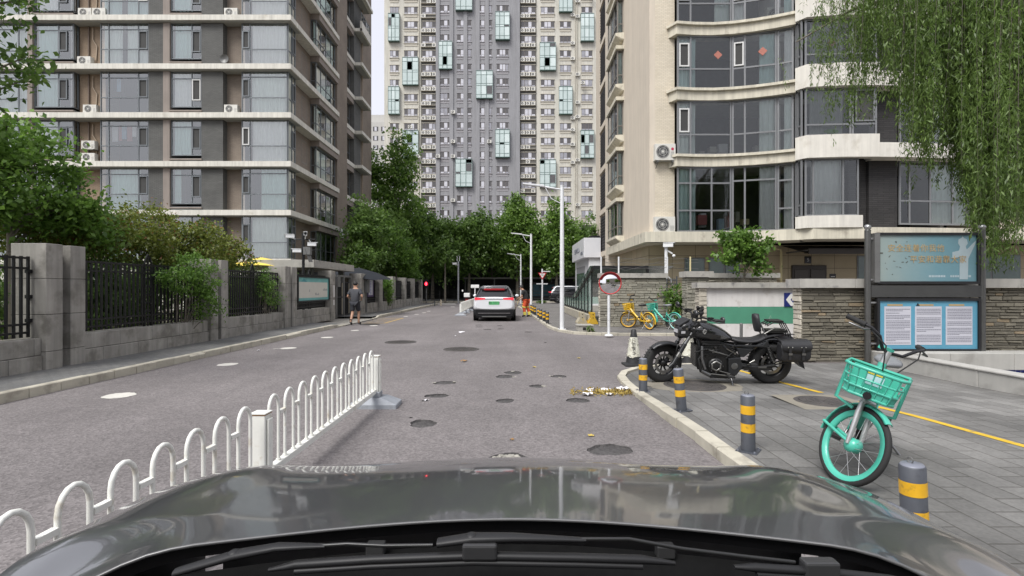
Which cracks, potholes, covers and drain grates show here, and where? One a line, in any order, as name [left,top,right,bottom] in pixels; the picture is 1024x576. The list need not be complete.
manhole cover [647,379,743,392]
pothole [587,444,633,455]
pothole [410,419,437,428]
manhole cover [772,395,880,409]
